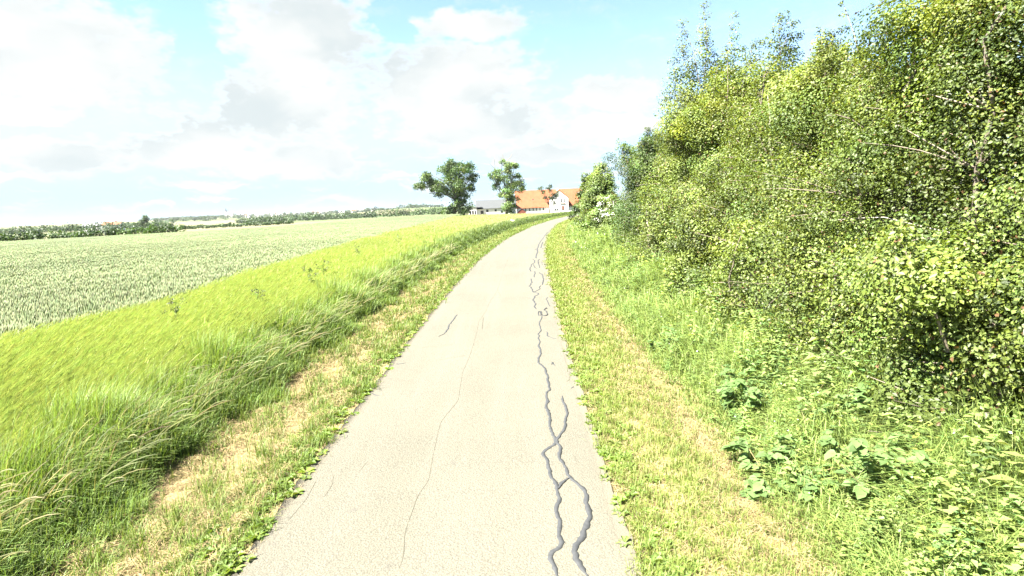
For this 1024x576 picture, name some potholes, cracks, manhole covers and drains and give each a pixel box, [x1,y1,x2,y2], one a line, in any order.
crack [399,231,534,567]
